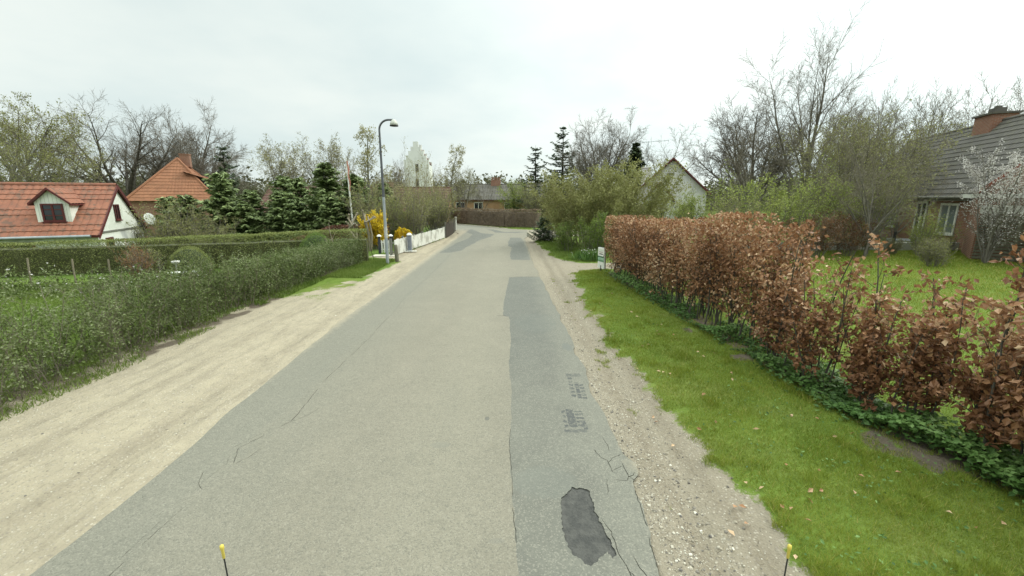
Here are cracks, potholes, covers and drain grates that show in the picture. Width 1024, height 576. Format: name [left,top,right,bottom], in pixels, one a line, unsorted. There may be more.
crack [109,256,449,576]
pothole [561,488,616,566]
crack [595,444,658,576]
